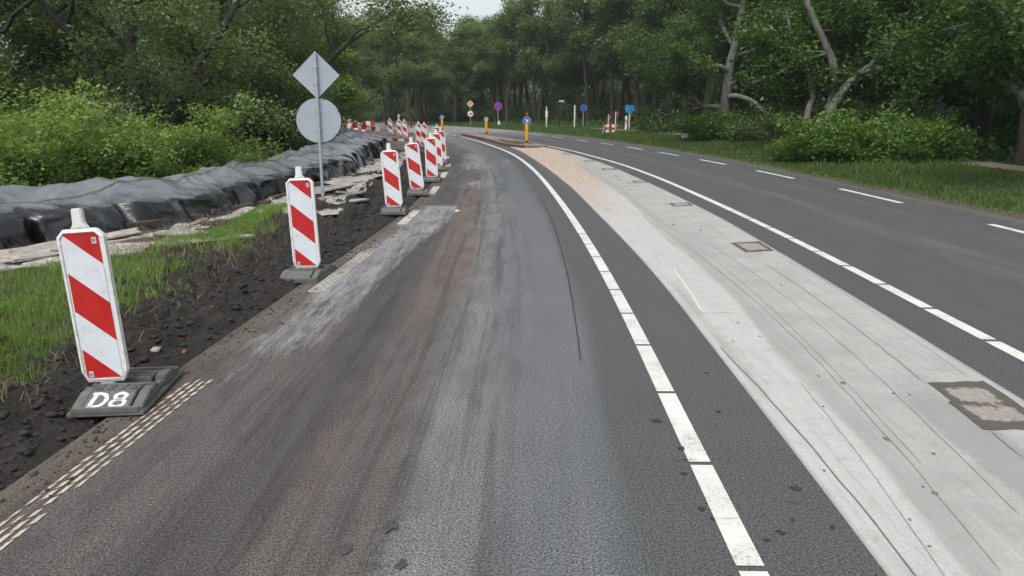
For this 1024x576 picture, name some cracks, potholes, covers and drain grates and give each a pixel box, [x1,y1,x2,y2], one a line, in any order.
manhole cover [732,241,774,252]
